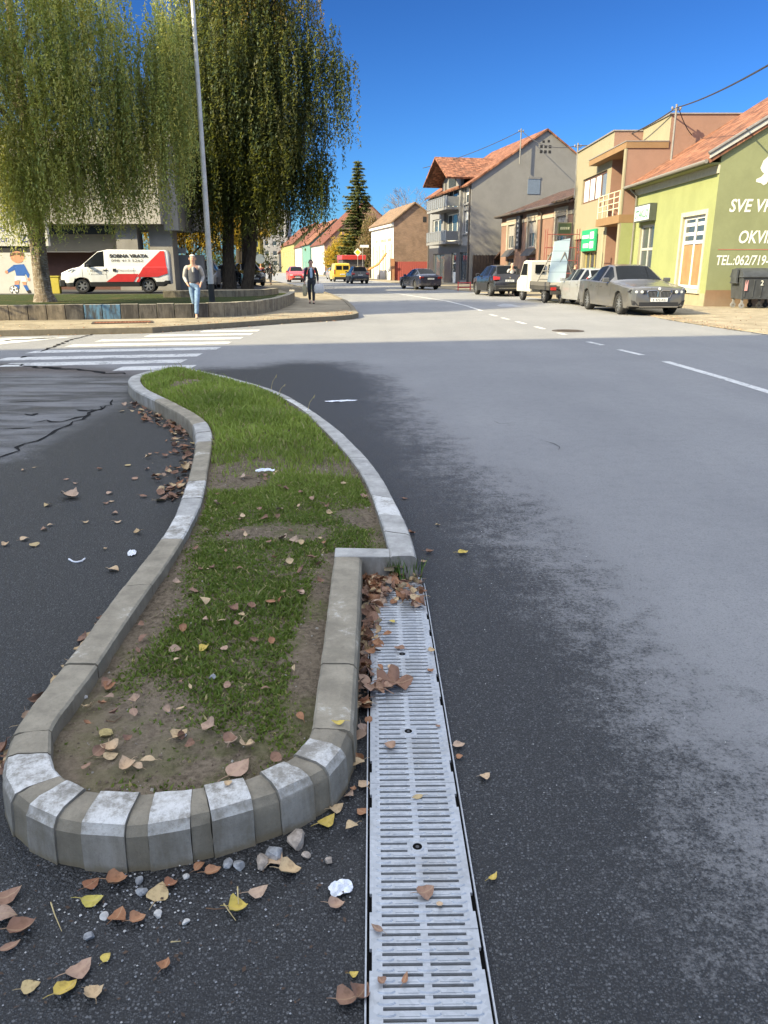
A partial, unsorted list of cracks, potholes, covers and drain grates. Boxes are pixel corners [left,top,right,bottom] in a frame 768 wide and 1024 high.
drain grate [369,929,493,1024]
crack [6,400,106,429]
drain grate [370,783,478,930]
drain grate [371,577,429,625]
drain grate [370,625,440,690]
drain grate [370,689,455,783]
